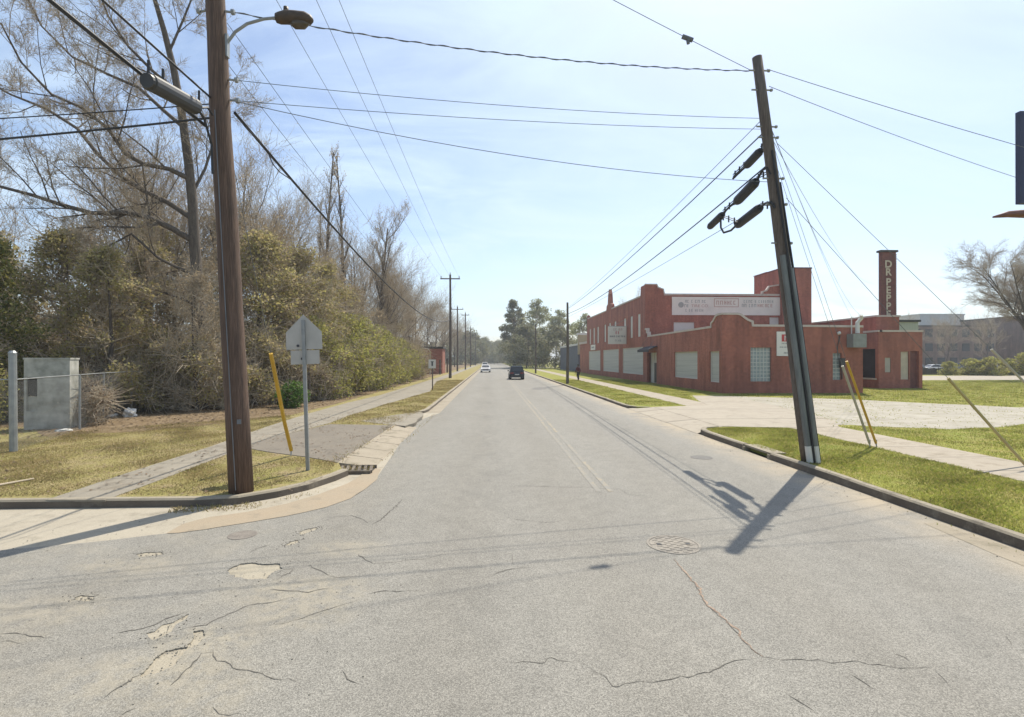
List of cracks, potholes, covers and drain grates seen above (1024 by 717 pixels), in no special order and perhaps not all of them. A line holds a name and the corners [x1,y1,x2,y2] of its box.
manhole cover [227,530,257,540]
drain grate [340,465,377,474]
crack [123,553,448,632]
pothole [147,614,189,640]
manhole cover [646,535,701,554]
pothole [140,630,205,677]
pothole [227,562,283,579]
crack [587,654,948,690]
crack [172,652,297,684]
